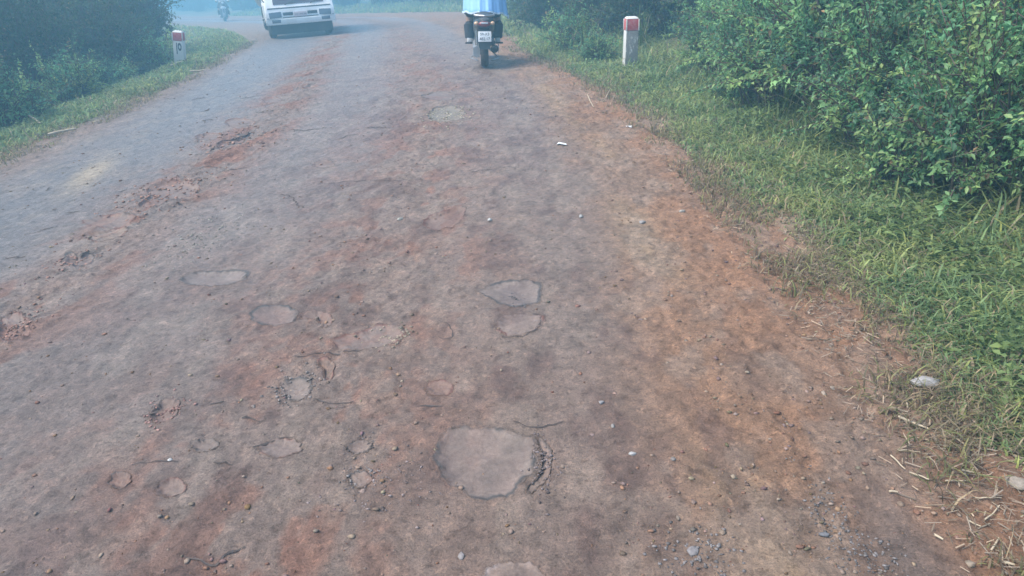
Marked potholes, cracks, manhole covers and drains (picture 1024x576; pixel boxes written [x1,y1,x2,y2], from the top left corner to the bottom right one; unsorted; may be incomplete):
pothole [62,250,95,268]
pothole [526,436,553,495]
pothole [279,376,313,402]
pothole [0,309,33,344]
pothole [214,130,255,149]
pothole [148,398,181,425]
